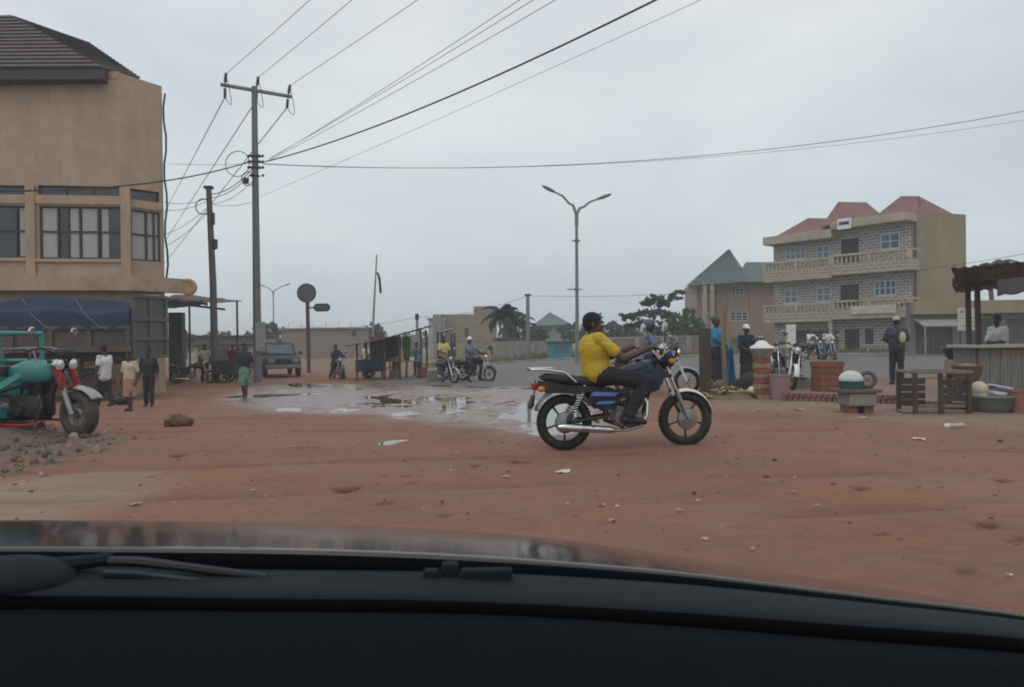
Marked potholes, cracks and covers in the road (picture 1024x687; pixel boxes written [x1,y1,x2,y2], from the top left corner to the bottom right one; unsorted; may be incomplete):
pothole [368,392,494,408]
pothole [381,411,428,419]
pothole [419,397,486,422]
pothole [963,518,1013,530]
